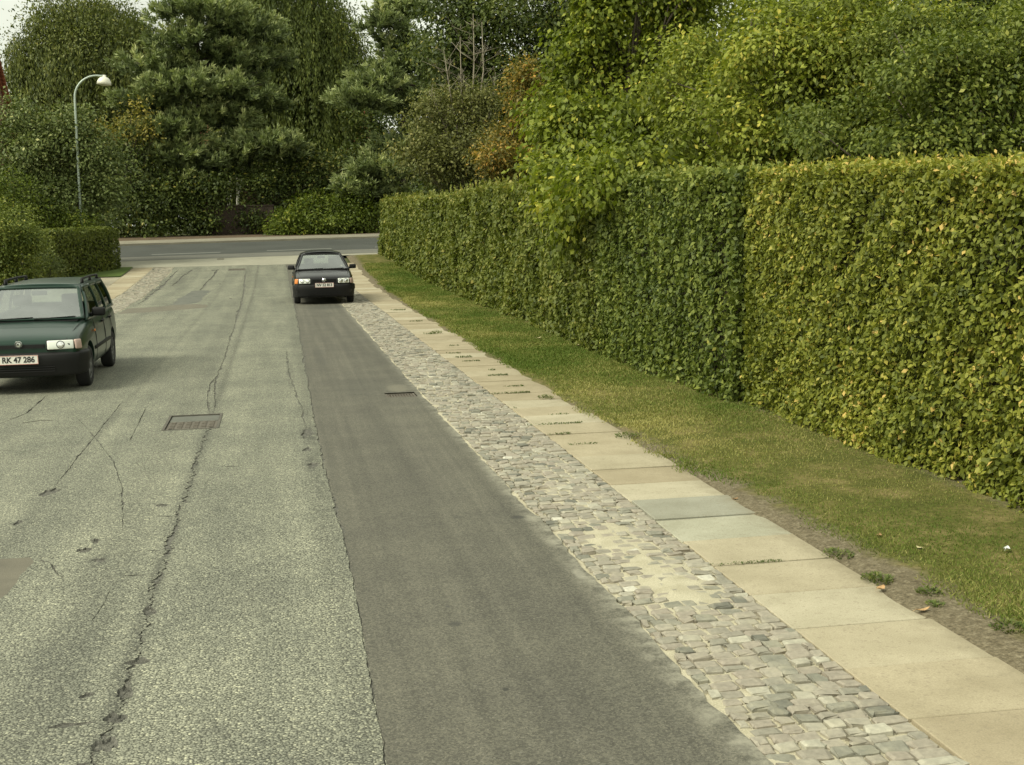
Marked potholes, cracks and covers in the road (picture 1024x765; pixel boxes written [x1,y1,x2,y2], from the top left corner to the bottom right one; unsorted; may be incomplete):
crack [90,274,246,765]
crack [56,405,146,531]
crack [286,351,307,428]
crack [0,399,53,451]
